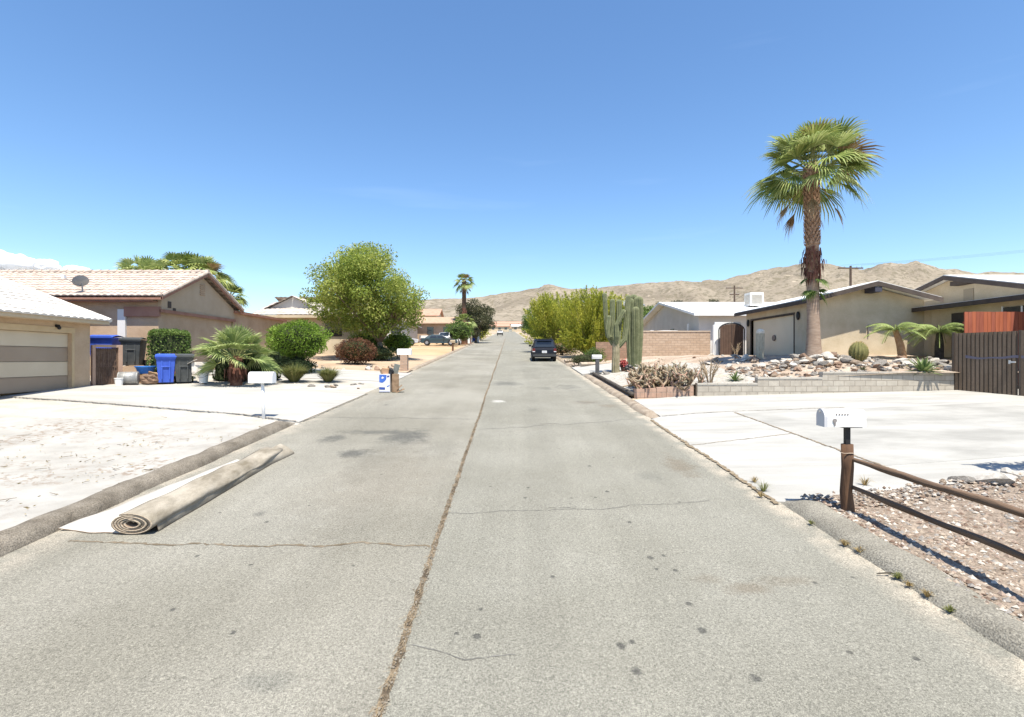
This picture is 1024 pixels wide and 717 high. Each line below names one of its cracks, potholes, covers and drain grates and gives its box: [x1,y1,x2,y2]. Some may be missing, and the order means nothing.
crack [70,338,709,717]
